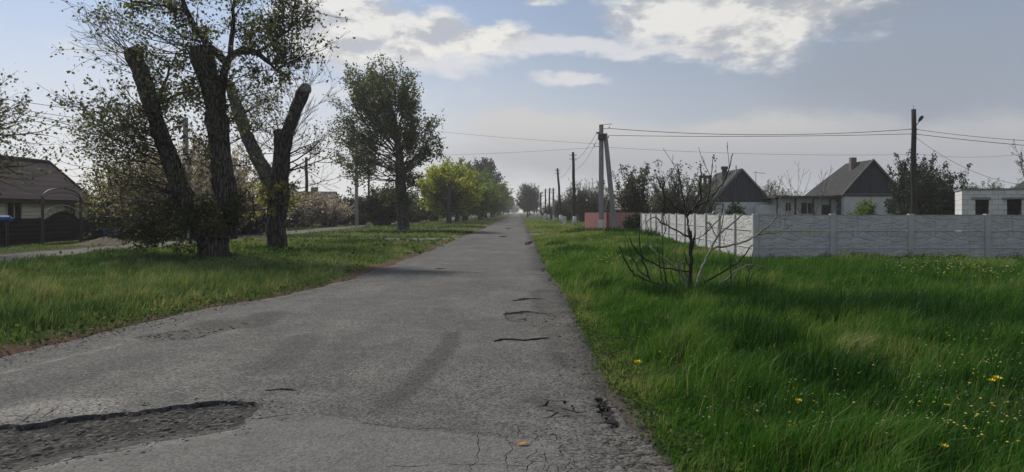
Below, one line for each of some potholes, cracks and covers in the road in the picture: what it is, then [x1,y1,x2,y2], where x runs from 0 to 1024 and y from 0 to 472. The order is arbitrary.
pothole [0,400,261,472]
crack [443,398,654,472]
pothole [504,311,563,328]
pothole [594,396,620,429]
